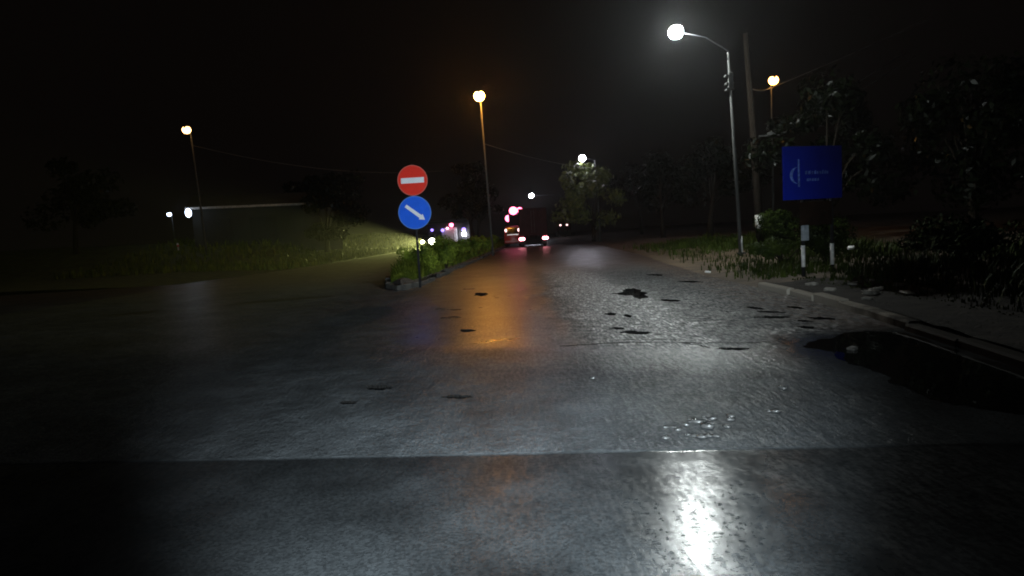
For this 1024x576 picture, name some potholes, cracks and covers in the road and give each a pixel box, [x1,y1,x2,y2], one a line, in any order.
pothole [612,288,648,299]
